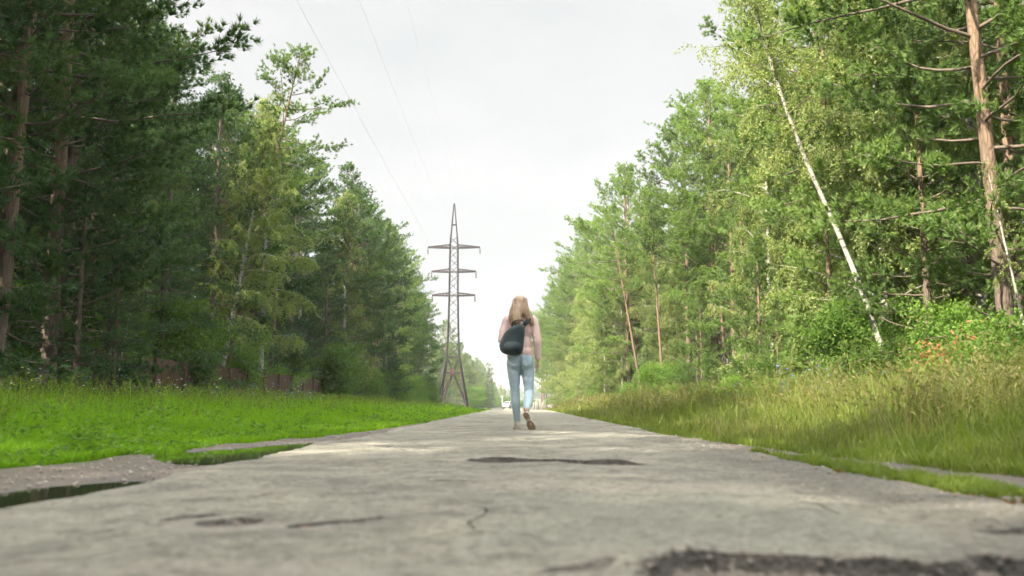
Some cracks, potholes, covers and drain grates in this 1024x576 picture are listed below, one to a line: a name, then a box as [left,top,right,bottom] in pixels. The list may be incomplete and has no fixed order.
crack [381,506,543,550]
pothole [605,544,1024,576]
pothole [464,457,645,466]
pothole [194,517,264,528]
